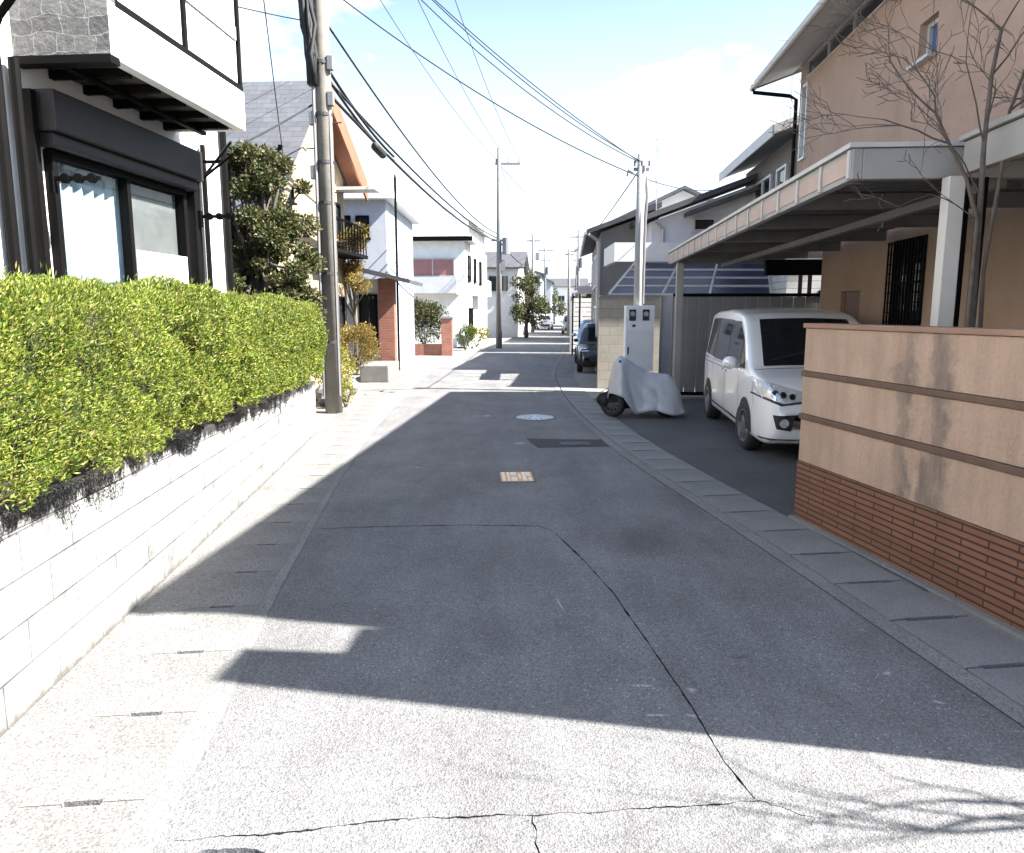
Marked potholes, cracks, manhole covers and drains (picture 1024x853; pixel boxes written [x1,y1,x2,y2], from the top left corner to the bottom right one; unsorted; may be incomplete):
manhole cover [498,471,536,482]
